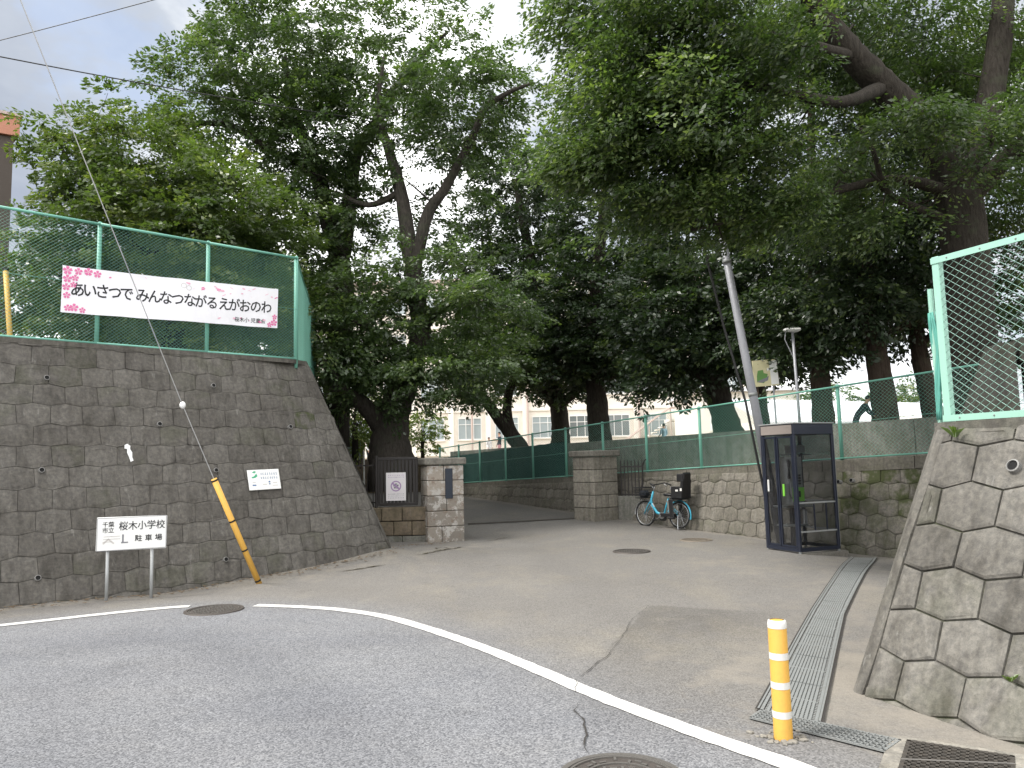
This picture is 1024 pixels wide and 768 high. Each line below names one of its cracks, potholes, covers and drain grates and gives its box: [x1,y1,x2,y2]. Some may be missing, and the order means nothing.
manhole cover [183,604,245,616]
crack [573,607,647,751]
drain grate [879,734,1024,768]
drain grate [749,709,901,752]
manhole cover [561,753,678,768]
